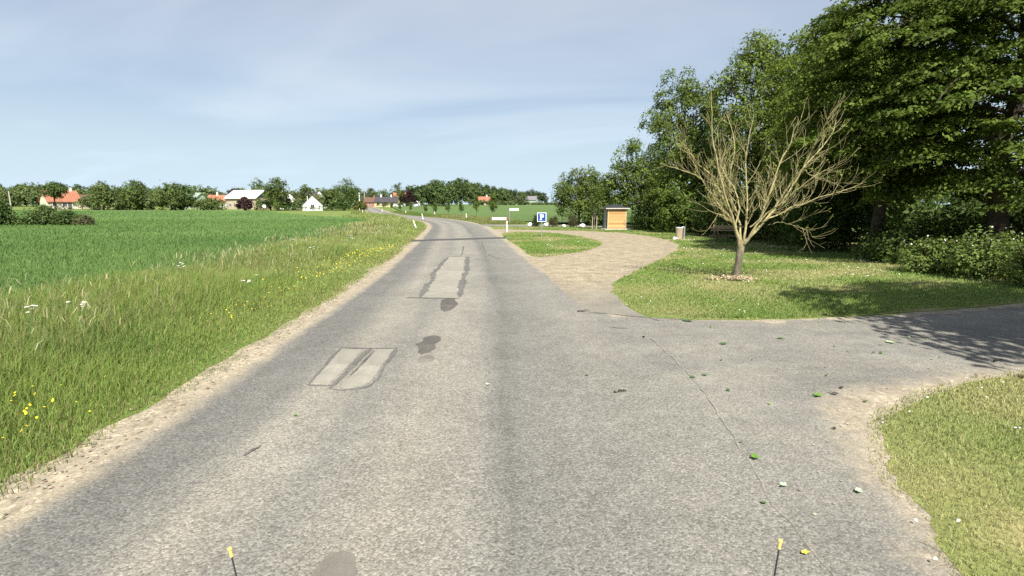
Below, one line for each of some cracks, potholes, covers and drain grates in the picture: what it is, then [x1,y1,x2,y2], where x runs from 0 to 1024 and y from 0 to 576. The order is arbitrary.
crack [651,338,835,576]
pothole [415,335,441,355]
pothole [440,298,458,312]
